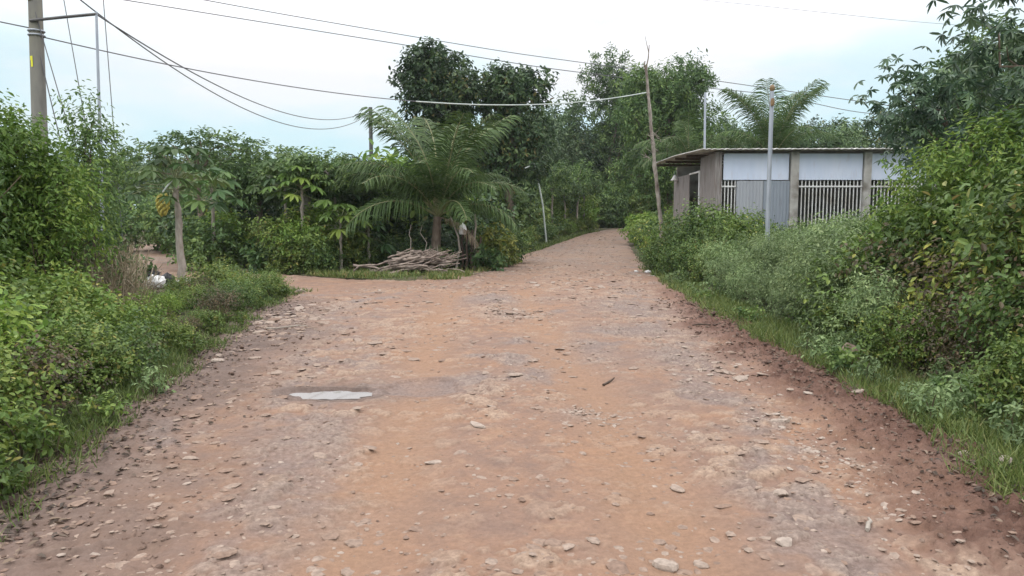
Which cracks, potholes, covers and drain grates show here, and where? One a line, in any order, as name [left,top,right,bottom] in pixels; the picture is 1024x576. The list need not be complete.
pothole [367,376,467,399]
